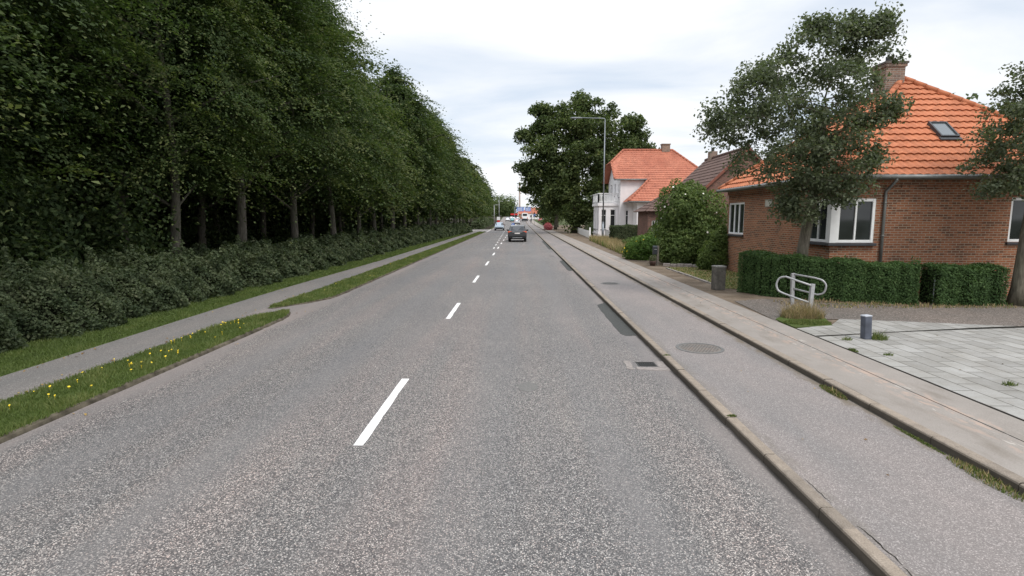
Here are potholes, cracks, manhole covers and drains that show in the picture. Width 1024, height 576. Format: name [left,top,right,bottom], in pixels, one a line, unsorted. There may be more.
drain grate [623,361,671,371]
manhole cover [676,343,724,354]
